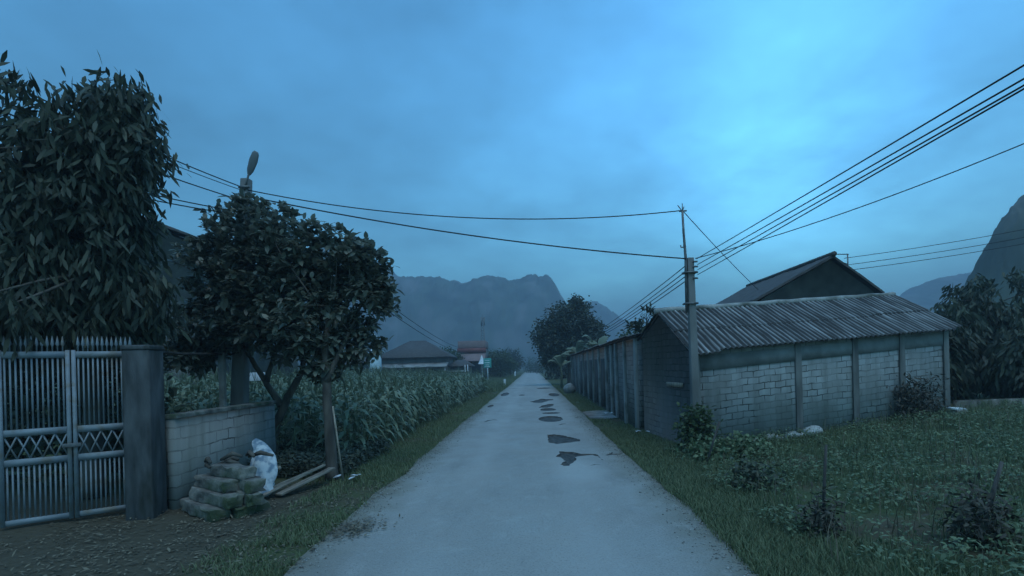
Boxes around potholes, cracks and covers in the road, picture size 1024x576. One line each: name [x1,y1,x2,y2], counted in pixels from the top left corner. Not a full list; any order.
pothole [556,451,602,466]
pothole [548,434,580,444]
